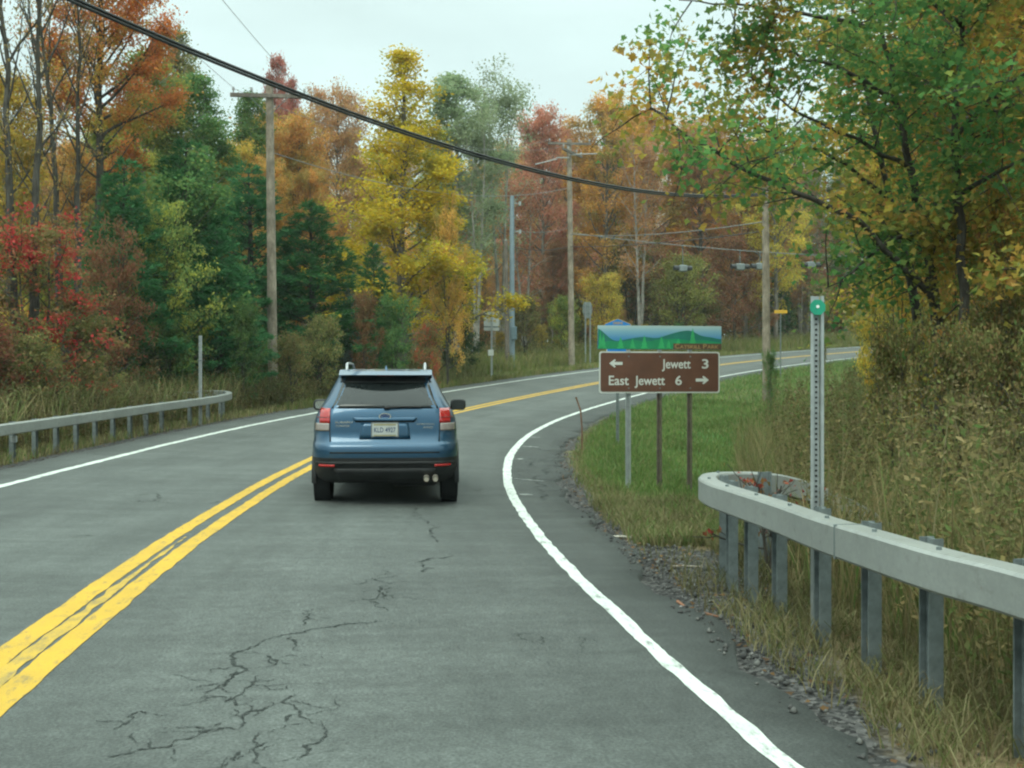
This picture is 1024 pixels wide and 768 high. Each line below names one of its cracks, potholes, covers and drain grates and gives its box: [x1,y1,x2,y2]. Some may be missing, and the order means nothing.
crack [351,569,436,611]
crack [499,447,578,500]
crack [413,507,451,572]
crack [93,609,393,768]
